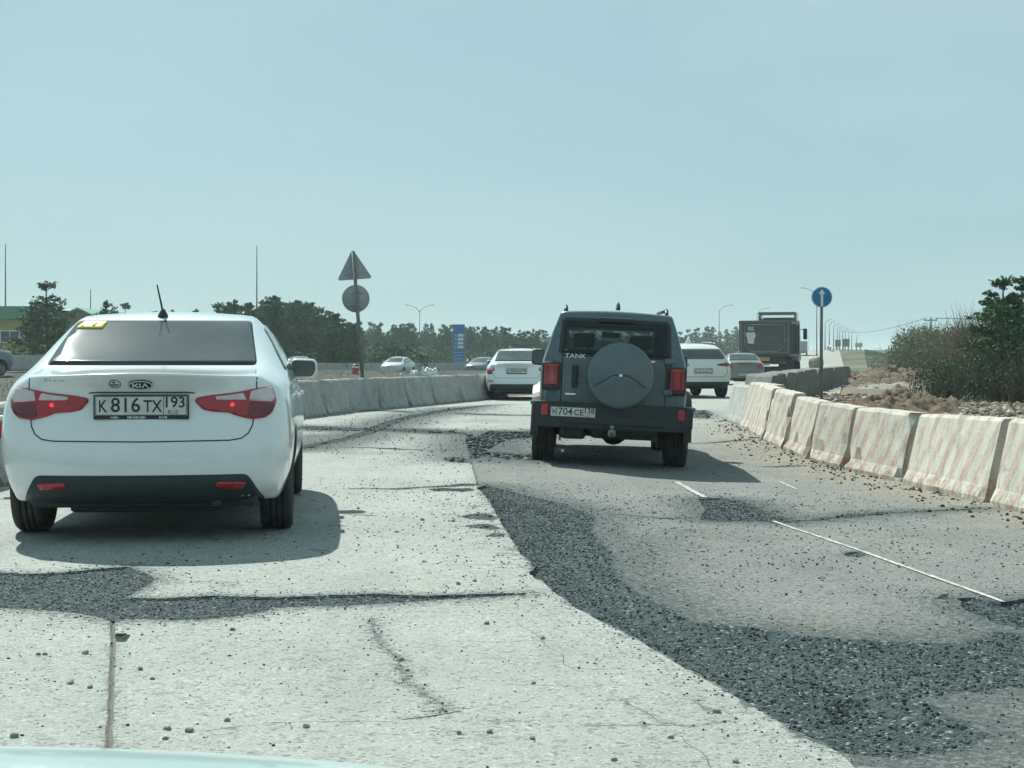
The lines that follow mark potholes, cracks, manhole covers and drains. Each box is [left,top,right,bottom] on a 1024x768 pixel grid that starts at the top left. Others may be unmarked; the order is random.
crack [274,619,459,723]
crack [508,622,618,687]
